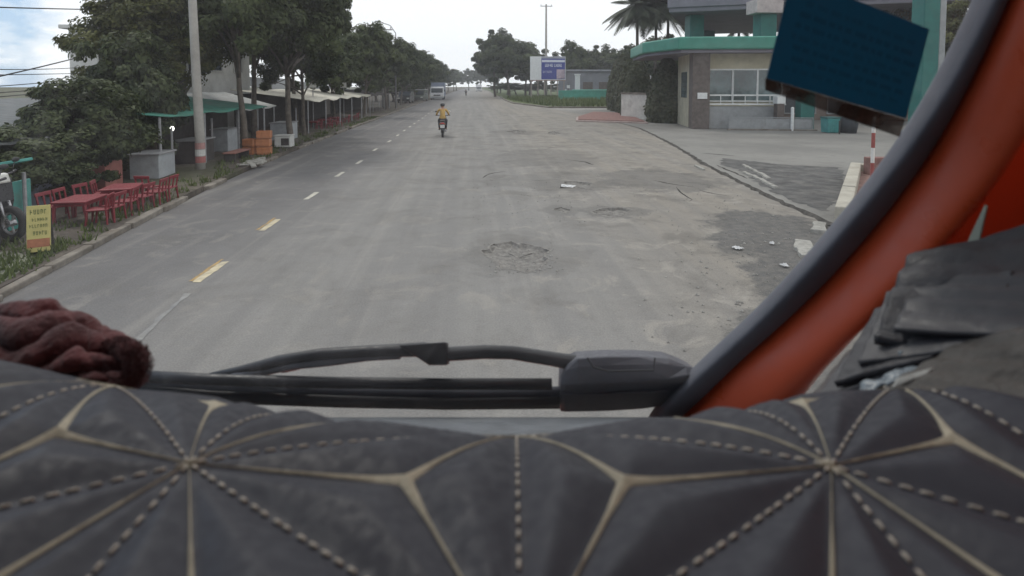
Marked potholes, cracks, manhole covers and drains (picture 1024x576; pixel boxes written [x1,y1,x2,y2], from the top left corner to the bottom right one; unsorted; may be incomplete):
pothole [590,207,633,218]
pothole [479,241,552,273]
